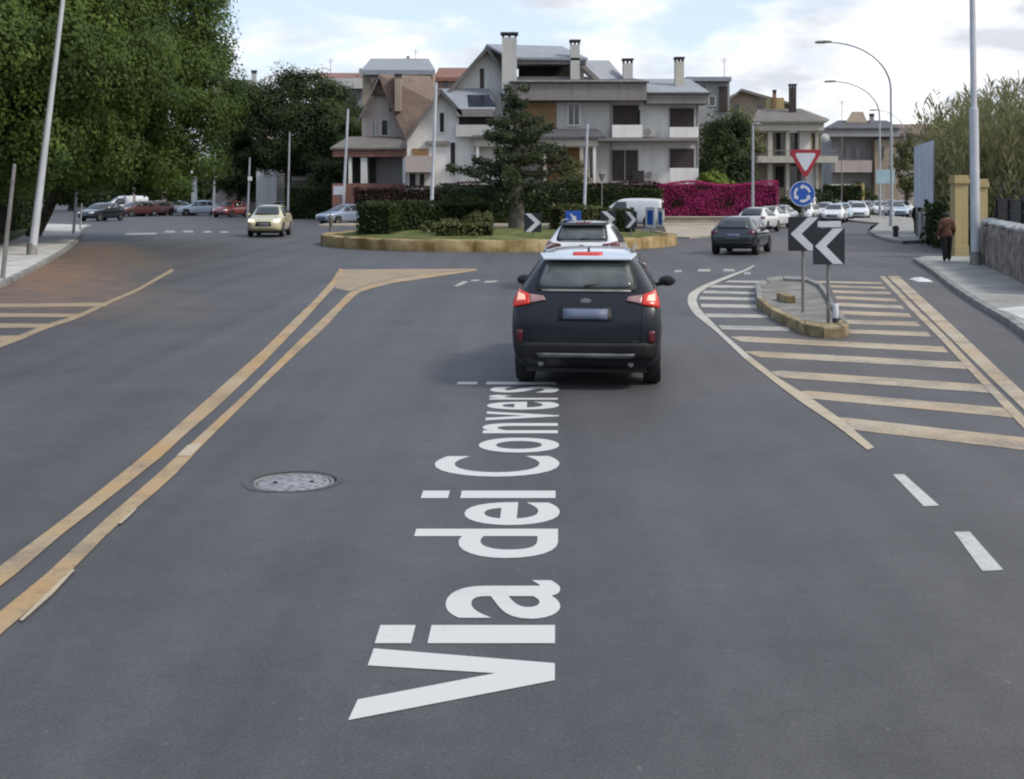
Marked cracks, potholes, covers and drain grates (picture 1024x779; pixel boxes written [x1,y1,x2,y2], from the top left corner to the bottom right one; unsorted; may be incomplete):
manhole cover [243,470,346,492]
